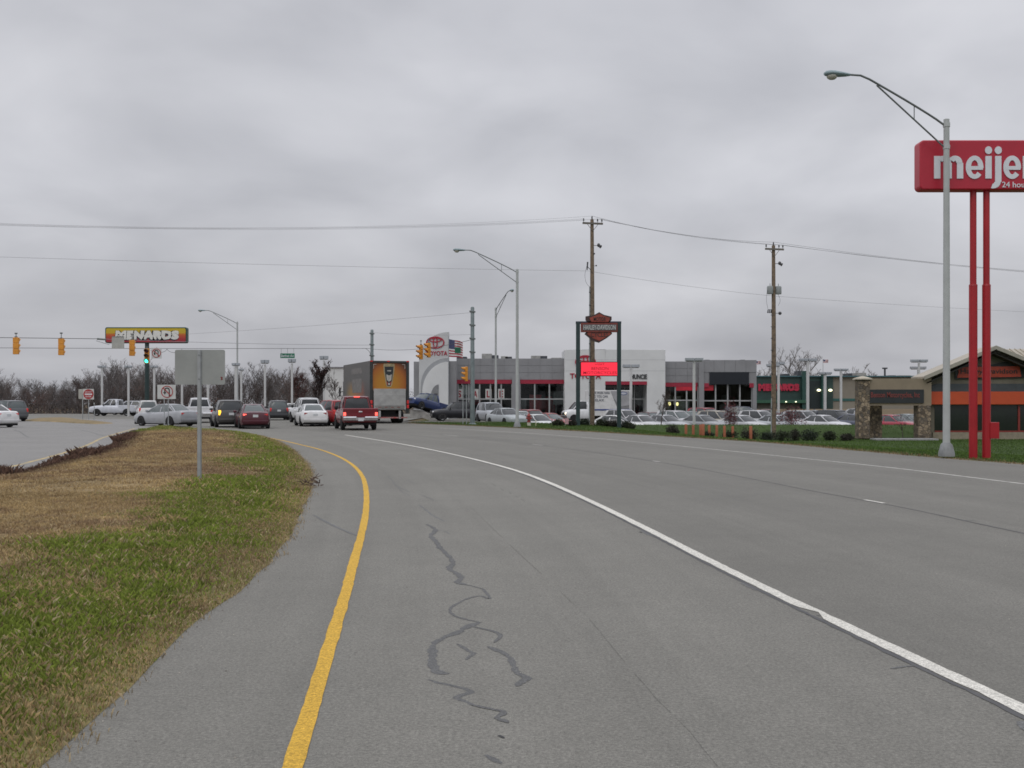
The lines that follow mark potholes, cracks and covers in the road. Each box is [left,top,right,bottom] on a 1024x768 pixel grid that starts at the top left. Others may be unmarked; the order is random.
crack [387,476,719,768]
